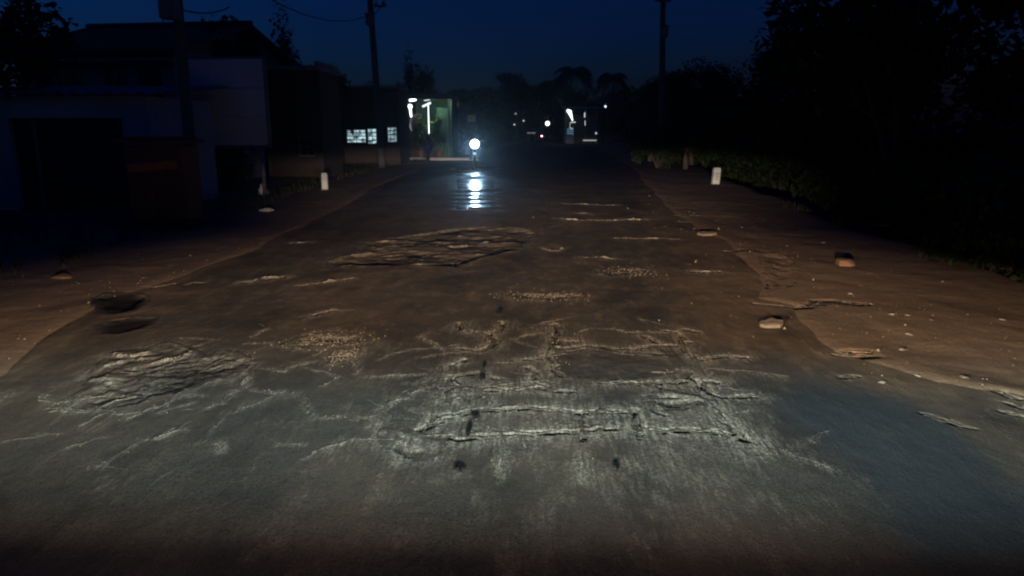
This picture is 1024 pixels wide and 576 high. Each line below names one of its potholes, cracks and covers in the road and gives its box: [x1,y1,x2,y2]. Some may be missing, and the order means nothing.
pothole [89,292,153,317]
crack [923,414,971,428]
pothole [94,316,162,336]
crack [756,300,866,310]
crack [0,317,832,485]
